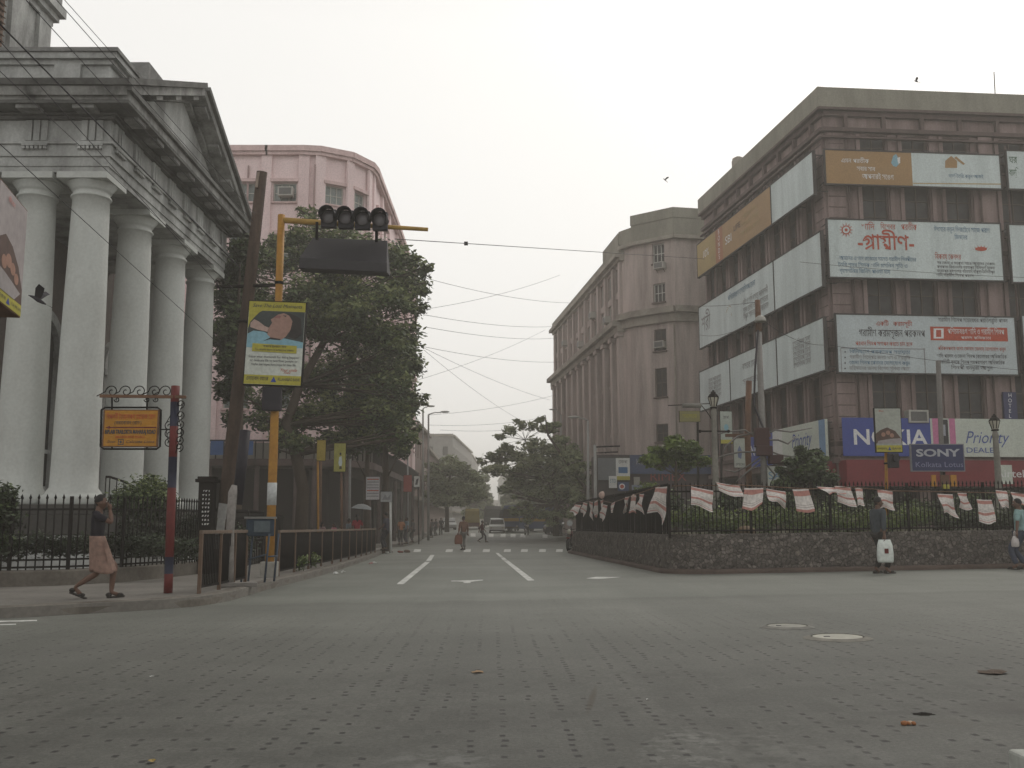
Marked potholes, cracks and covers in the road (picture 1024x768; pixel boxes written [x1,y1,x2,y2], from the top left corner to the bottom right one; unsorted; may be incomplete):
manhole cover [802,633,873,642]
